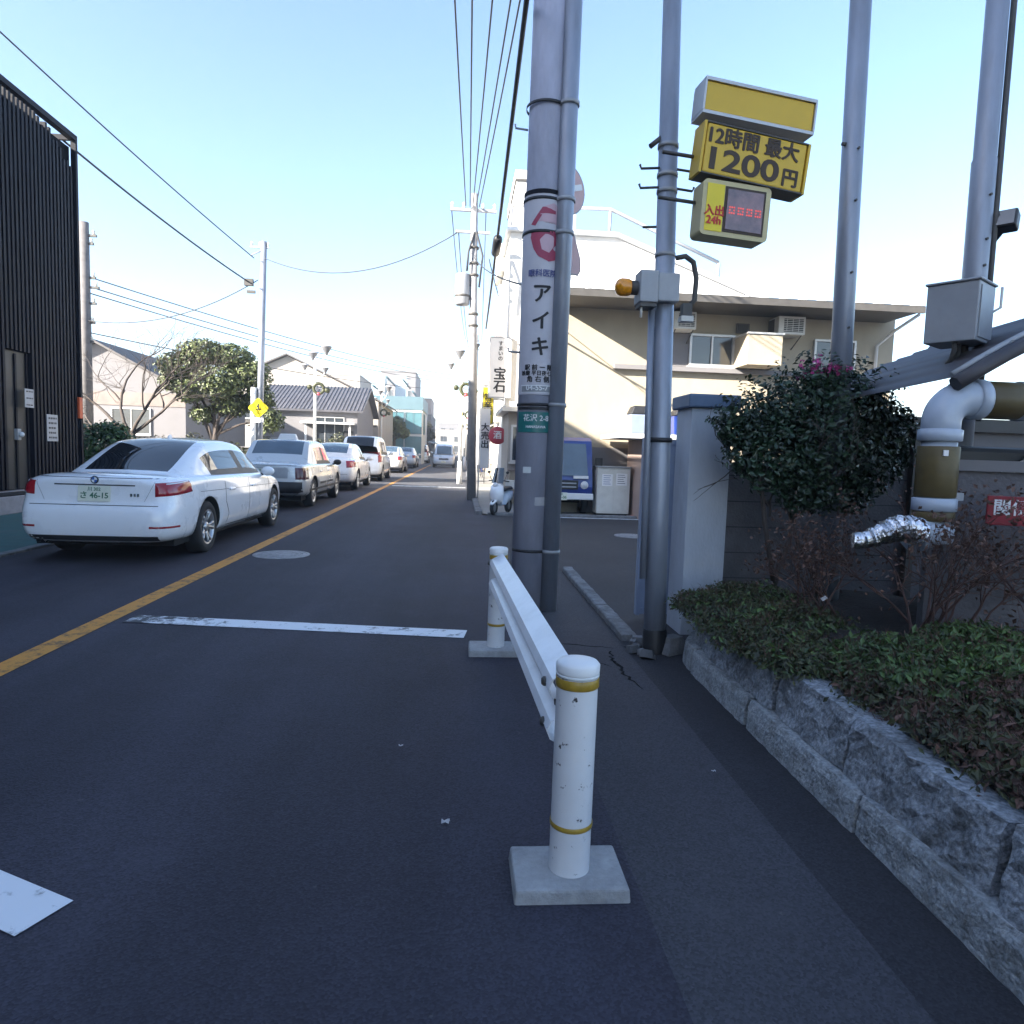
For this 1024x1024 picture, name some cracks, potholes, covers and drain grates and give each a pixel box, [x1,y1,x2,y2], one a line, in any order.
crack [571,644,643,689]
manhole cover [252,550,310,559]
